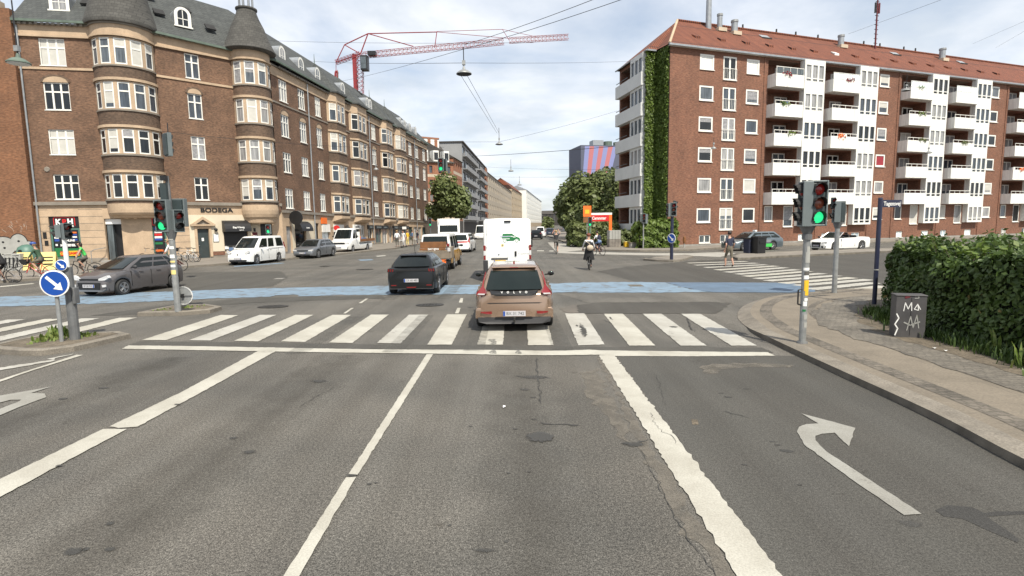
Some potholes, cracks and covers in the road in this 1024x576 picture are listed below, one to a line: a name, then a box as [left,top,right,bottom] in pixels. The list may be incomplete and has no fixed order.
crack [516,358,548,403]
crack [623,375,676,445]
